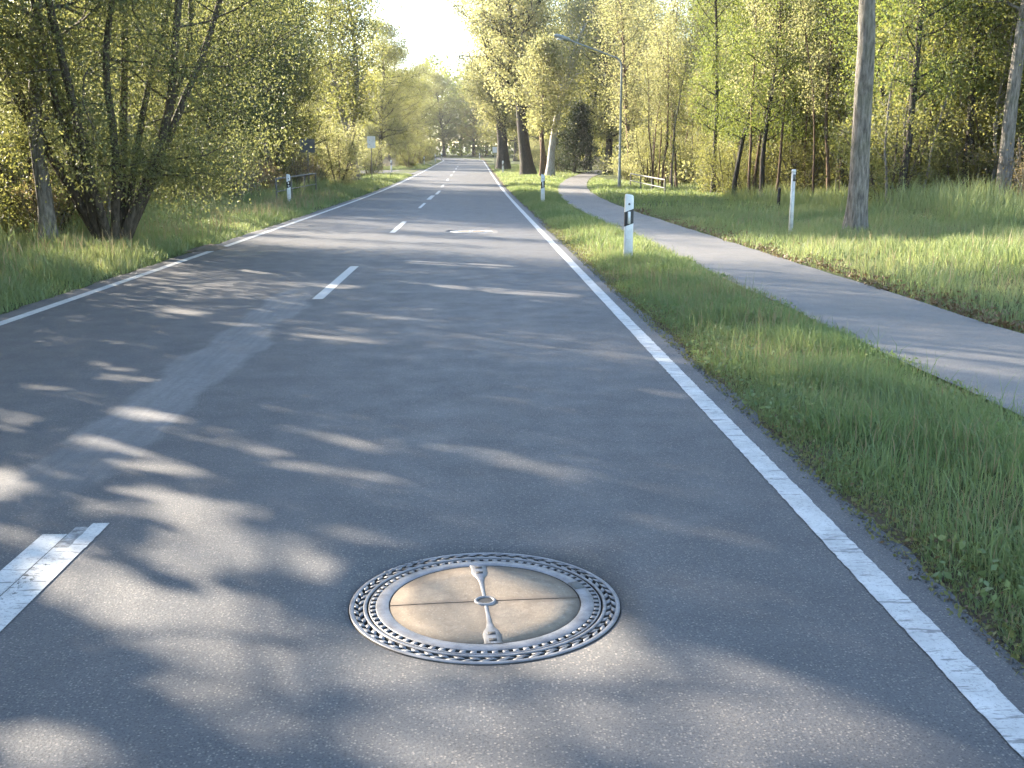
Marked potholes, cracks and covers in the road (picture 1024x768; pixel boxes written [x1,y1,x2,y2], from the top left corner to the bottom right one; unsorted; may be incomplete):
manhole cover [349,553,620,666]
